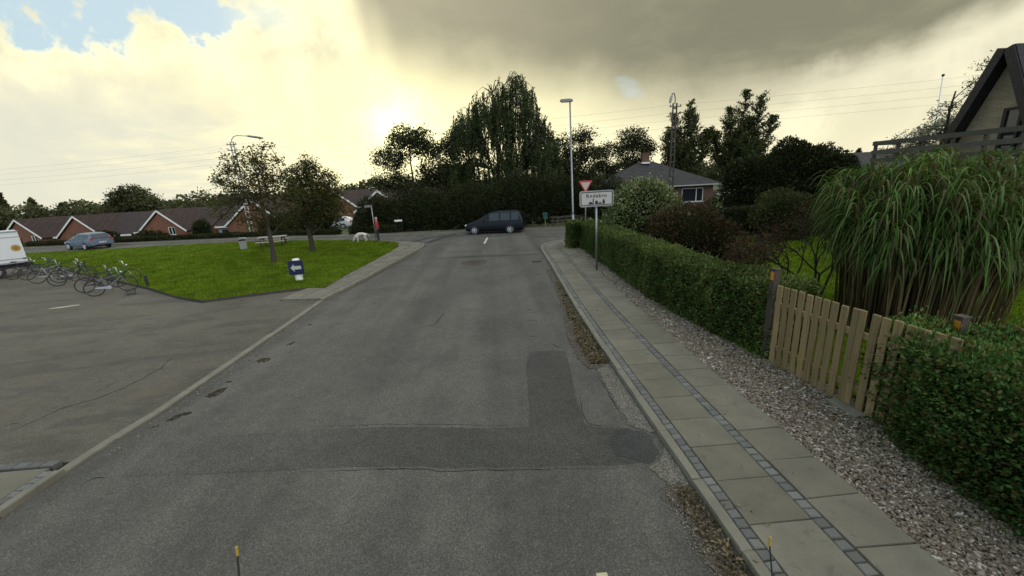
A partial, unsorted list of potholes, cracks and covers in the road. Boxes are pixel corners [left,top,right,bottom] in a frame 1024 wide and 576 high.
crack [0,360,169,436]
